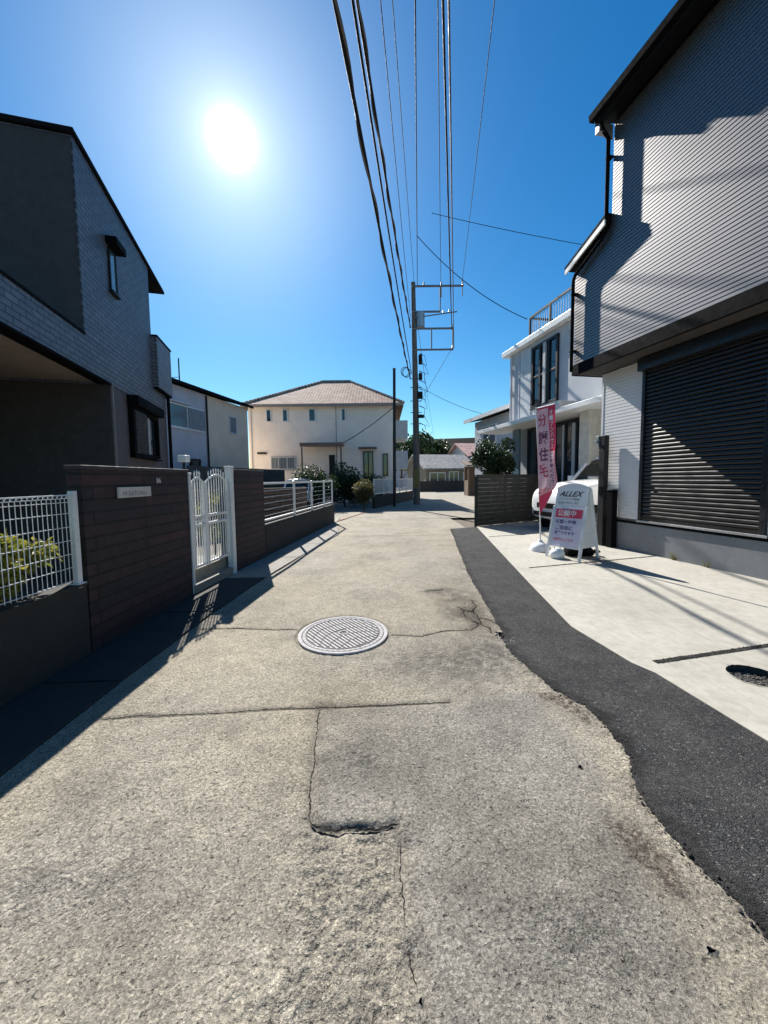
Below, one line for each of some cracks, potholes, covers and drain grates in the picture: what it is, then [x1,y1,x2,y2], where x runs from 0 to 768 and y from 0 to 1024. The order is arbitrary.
manhole cover [298,616,388,656]
crack [102,702,450,994]
crack [397,590,495,637]
